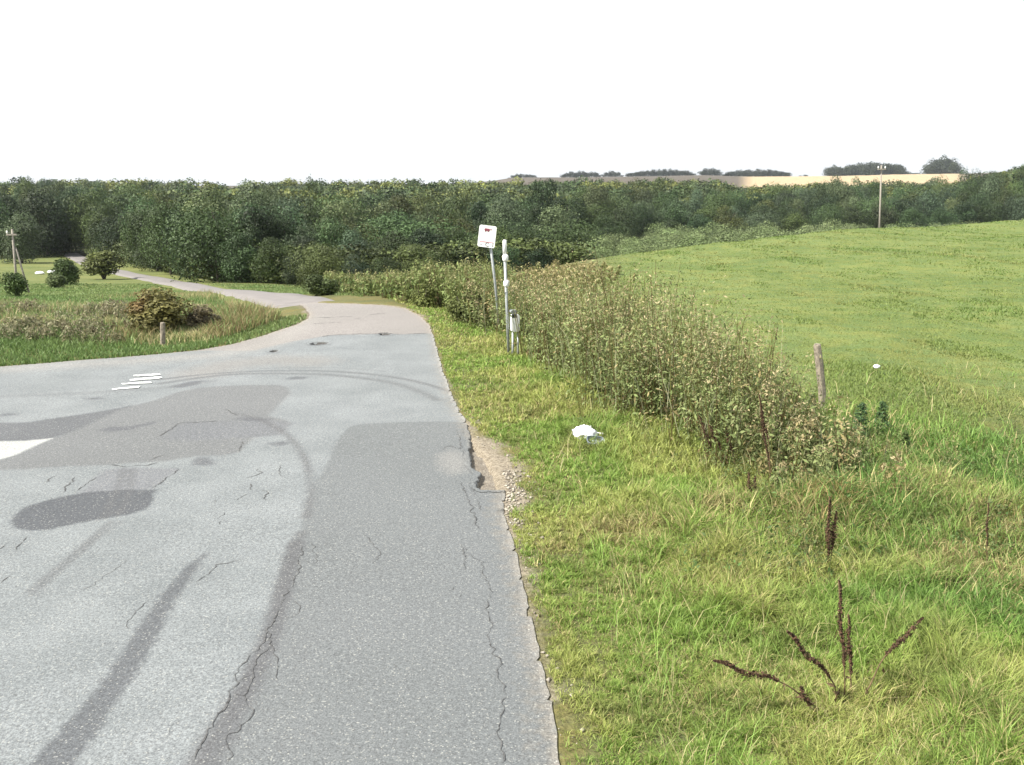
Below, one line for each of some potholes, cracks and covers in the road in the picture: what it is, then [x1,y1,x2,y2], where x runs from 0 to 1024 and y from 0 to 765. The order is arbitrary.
crack [461,544,506,763]
pothole [461,424,504,492]
